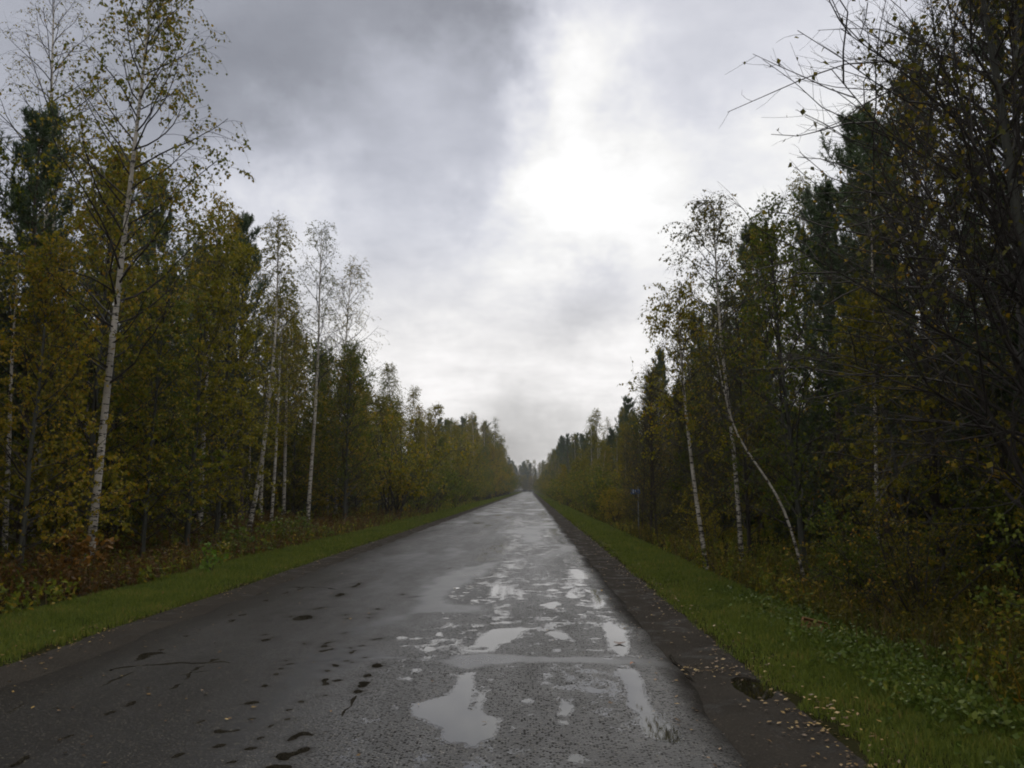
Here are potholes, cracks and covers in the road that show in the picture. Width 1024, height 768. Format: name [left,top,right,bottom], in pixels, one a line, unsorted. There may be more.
pothole [730,677,776,701]
pothole [134,652,164,661]
pothole [275,747,310,761]
crack [100,659,234,689]
